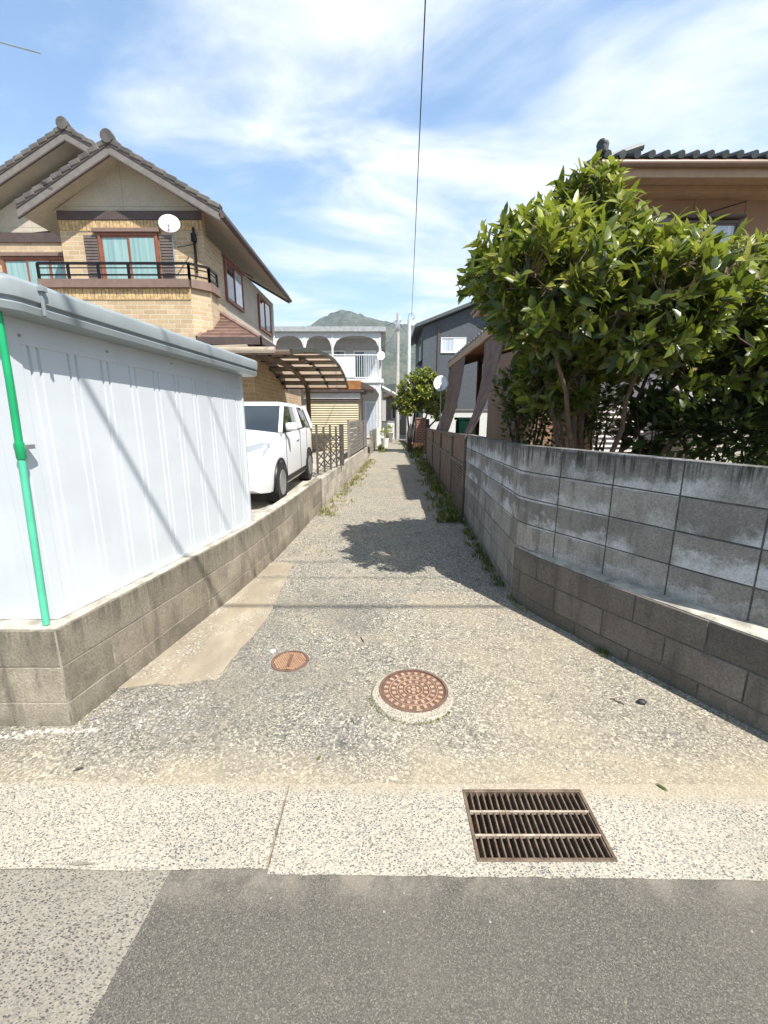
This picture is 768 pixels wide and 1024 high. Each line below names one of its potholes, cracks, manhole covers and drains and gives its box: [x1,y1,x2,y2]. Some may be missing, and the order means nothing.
drain grate [462,789,618,862]
manhole cover [368,669,454,725]
manhole cover [269,650,310,673]
